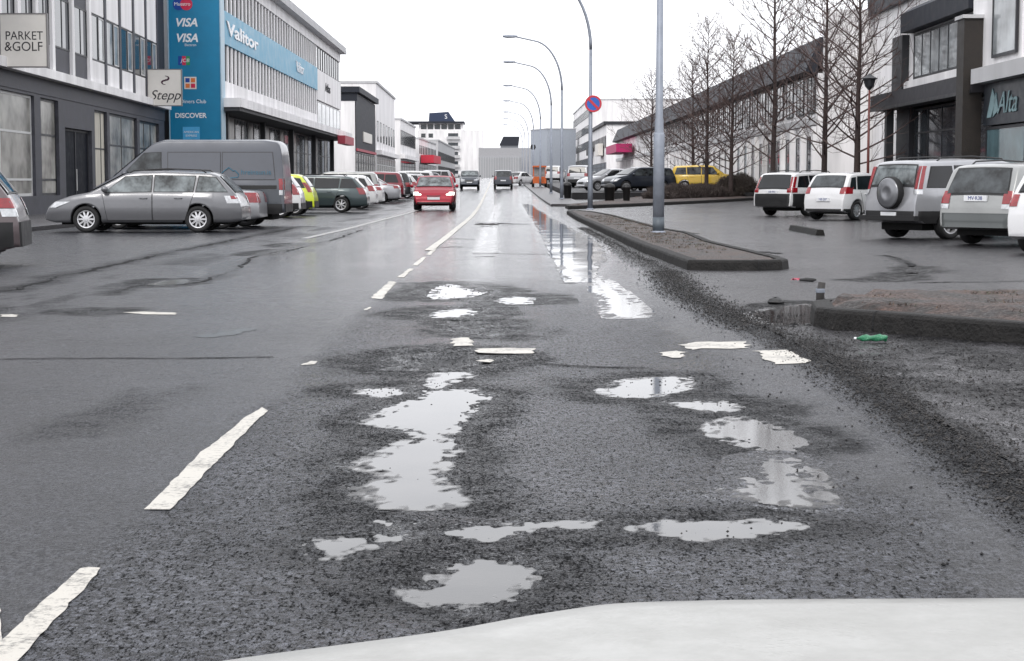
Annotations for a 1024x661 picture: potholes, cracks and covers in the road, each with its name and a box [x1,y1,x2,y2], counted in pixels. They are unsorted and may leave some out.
pothole [433,518,609,544]
pothole [650,398,759,416]
pothole [329,369,505,513]
pothole [610,515,824,544]
crack [6,227,361,293]
pothole [383,553,555,616]
pothole [284,517,433,563]
pothole [584,374,707,400]
pothole [680,415,822,453]
pothole [404,283,509,301]
pothole [682,450,856,511]
pothole [398,306,497,320]
